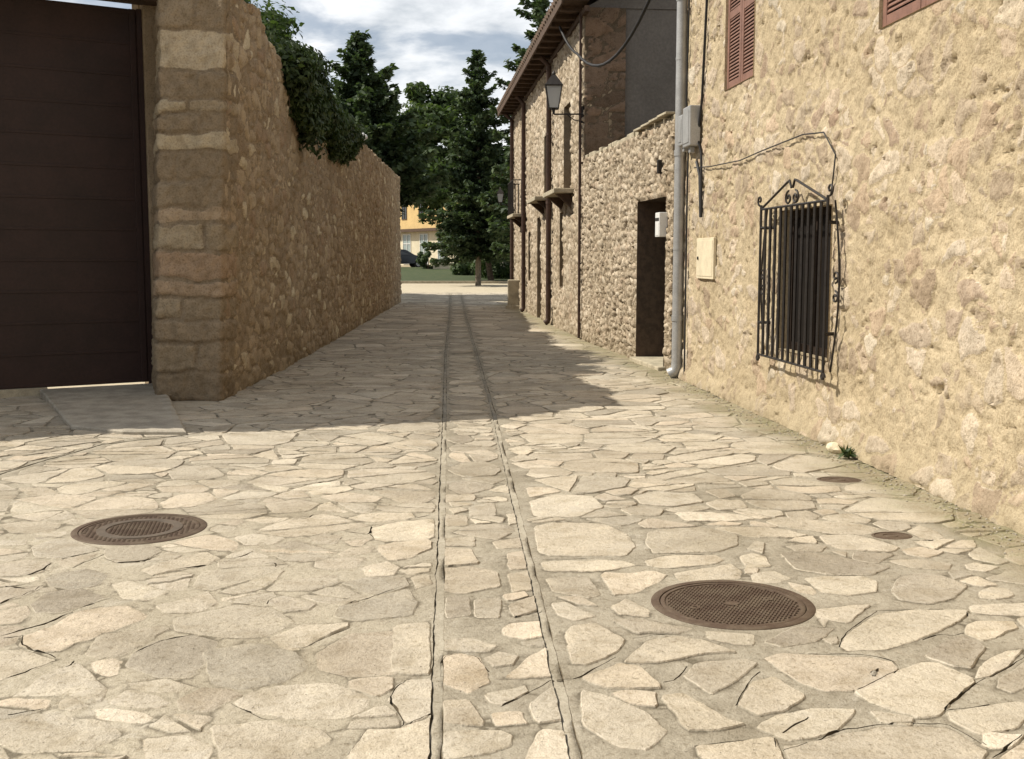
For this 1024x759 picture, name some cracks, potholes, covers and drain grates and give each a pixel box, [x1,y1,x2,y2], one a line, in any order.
manhole cover [651,580,816,630]
utility cover [871,532,913,540]
manhole cover [70,513,207,551]
